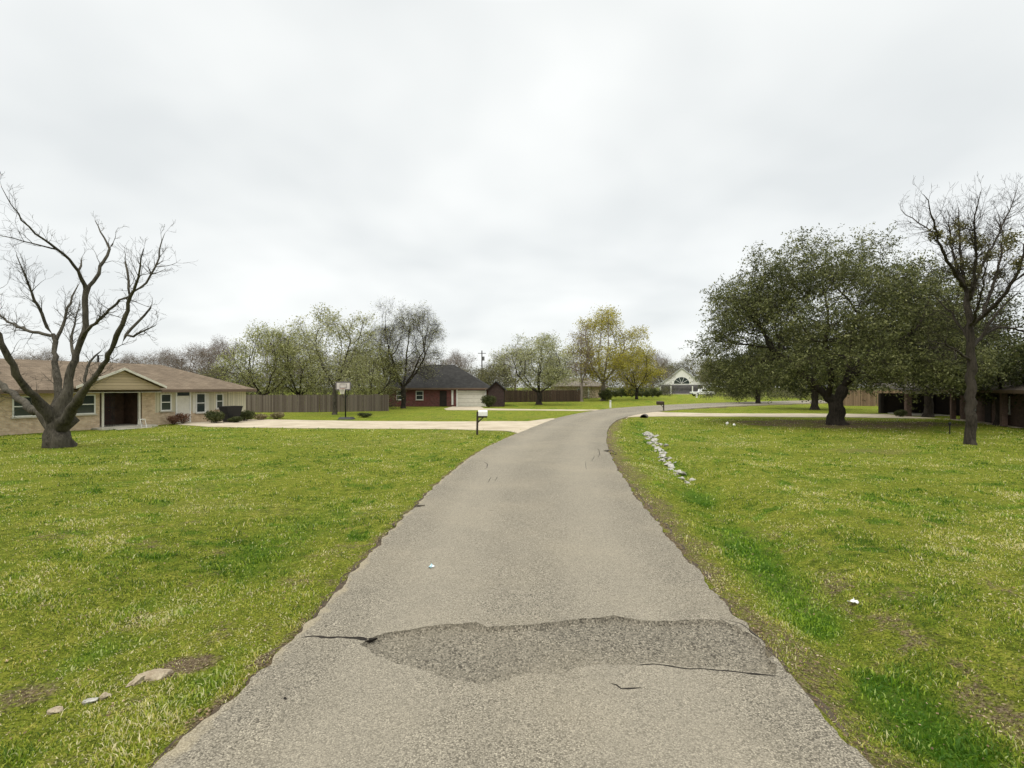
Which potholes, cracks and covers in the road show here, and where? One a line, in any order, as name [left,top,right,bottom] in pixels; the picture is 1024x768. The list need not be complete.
crack [611,663,776,690]
